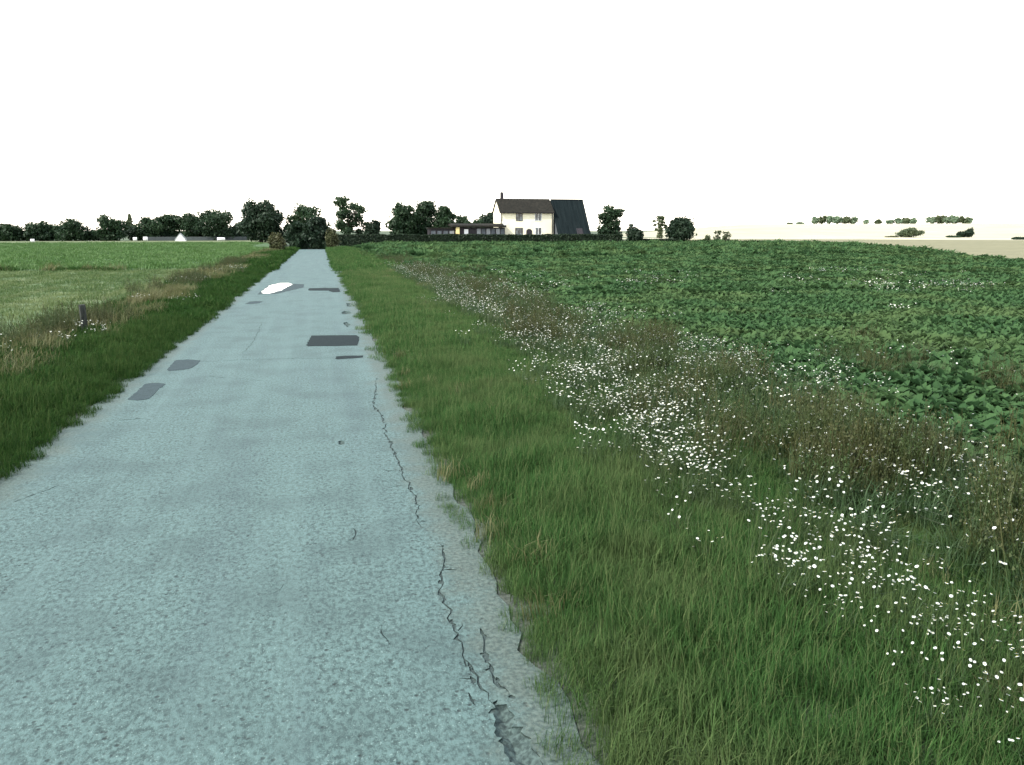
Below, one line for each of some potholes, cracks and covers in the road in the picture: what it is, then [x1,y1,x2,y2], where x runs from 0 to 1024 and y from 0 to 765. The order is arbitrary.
crack [372,380,425,527]
crack [437,545,515,705]
